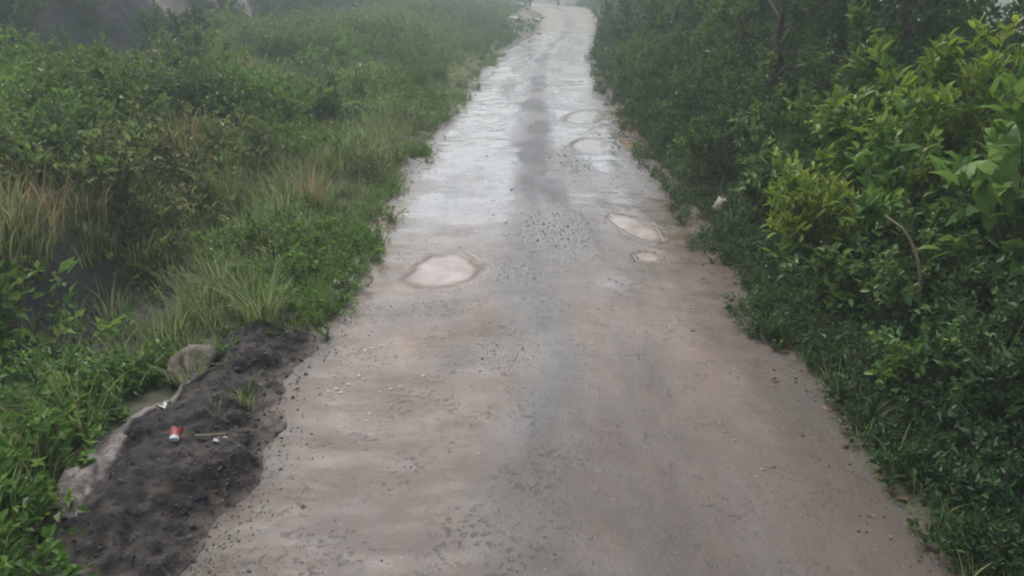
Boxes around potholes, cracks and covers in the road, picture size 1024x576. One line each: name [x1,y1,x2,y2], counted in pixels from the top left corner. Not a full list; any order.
pothole [391,249,491,292]
